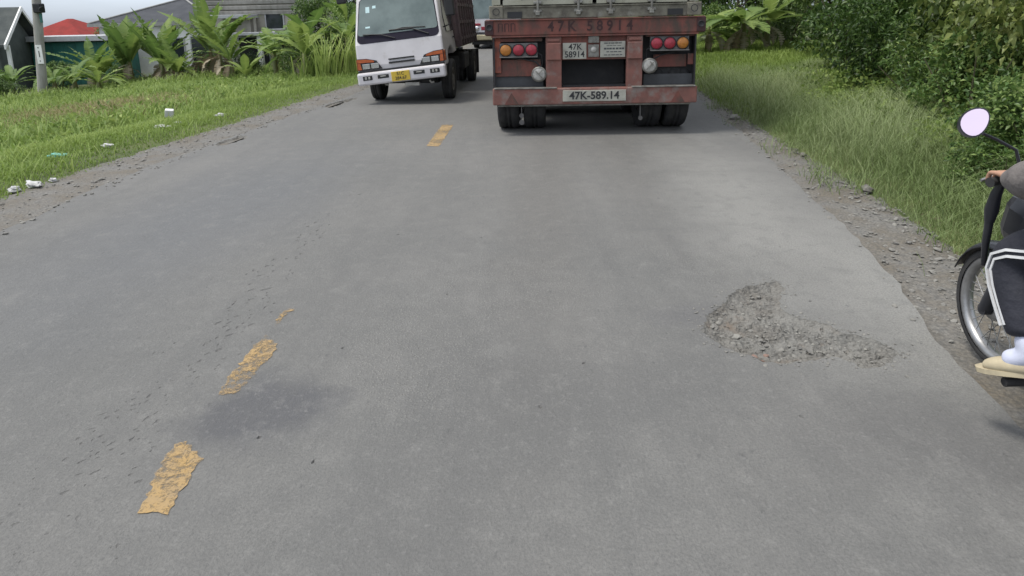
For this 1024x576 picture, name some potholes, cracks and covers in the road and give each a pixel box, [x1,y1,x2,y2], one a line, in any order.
pothole [701,281,899,368]
